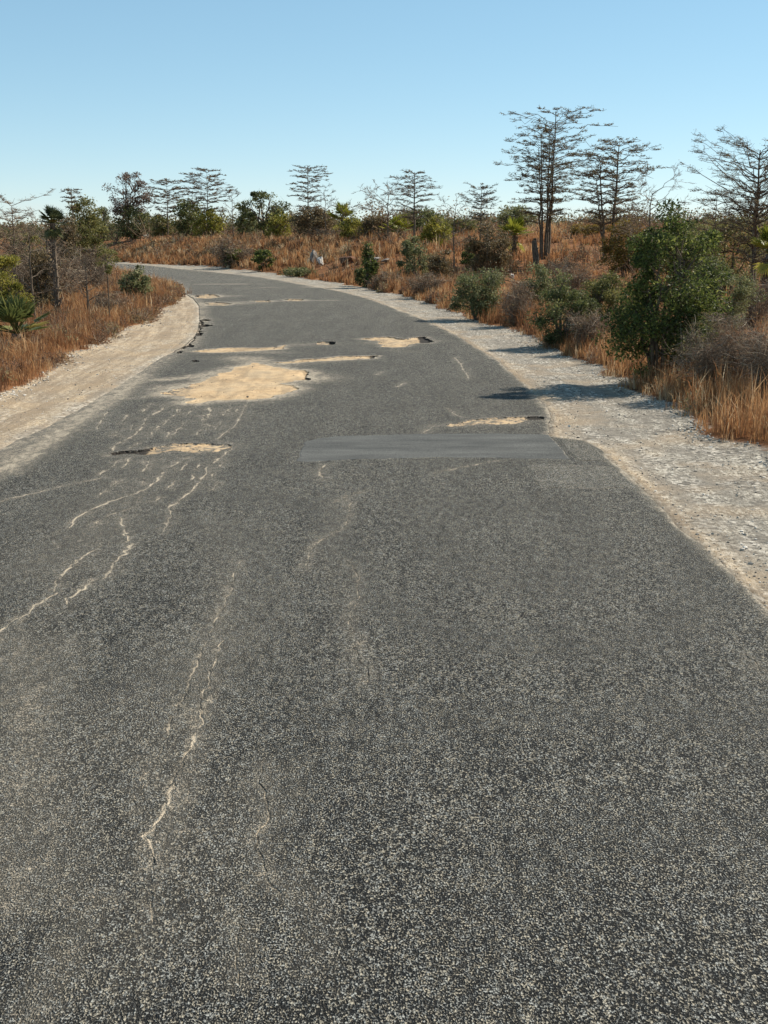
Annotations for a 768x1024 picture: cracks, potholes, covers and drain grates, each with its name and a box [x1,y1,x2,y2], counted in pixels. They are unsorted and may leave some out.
pothole [362,337,434,347]
pothole [275,356,376,364]
pothole [161,363,311,404]
pothole [111,443,232,456]
crack [0,402,285,898]
pothole [446,416,545,427]
